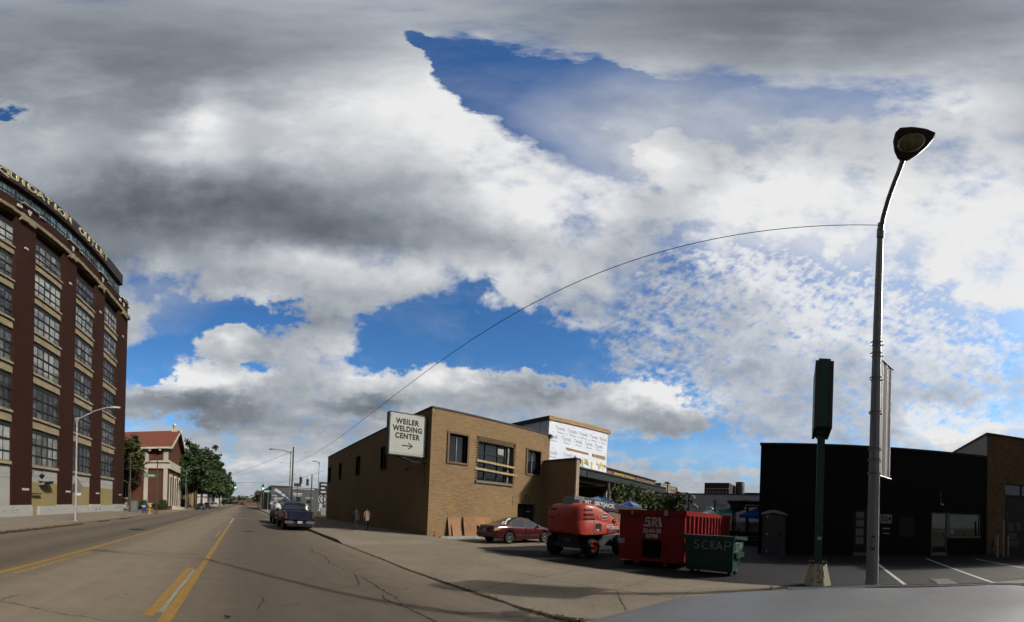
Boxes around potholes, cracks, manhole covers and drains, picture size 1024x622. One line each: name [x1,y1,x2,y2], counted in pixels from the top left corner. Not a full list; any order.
crack [311,548,436,622]
